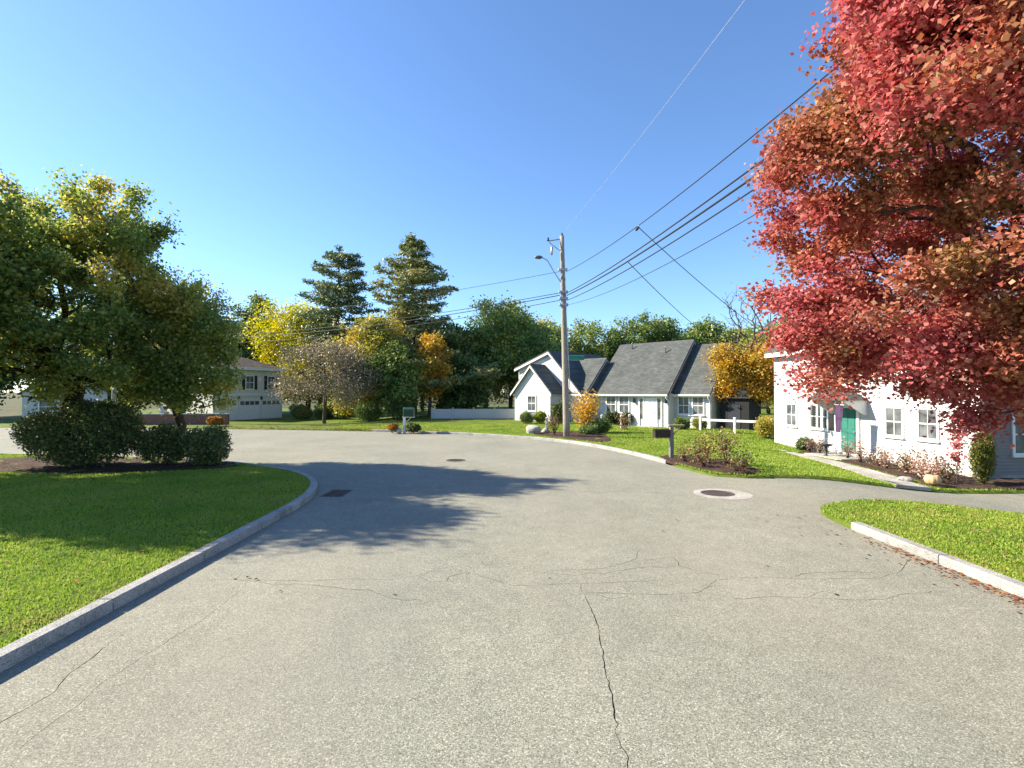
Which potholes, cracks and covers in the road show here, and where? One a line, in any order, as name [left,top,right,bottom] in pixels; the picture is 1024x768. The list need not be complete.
manhole cover [694,489,753,500]
crack [233,550,931,768]
crack [0,589,242,750]
